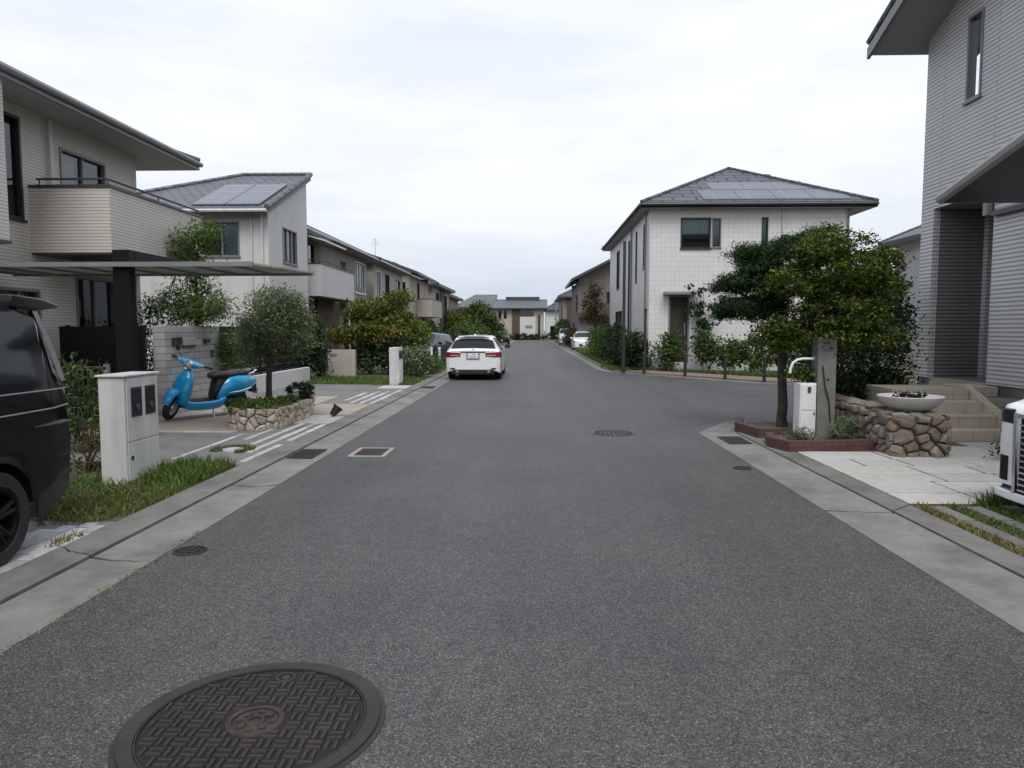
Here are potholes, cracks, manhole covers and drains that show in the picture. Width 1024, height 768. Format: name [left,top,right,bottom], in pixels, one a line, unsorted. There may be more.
manhole cover [347,447,395,457]
drain grate [717,436,753,444]
drain grate [286,449,327,459]
utility cover [173,545,208,556]
manhole cover [108,662,386,768]
